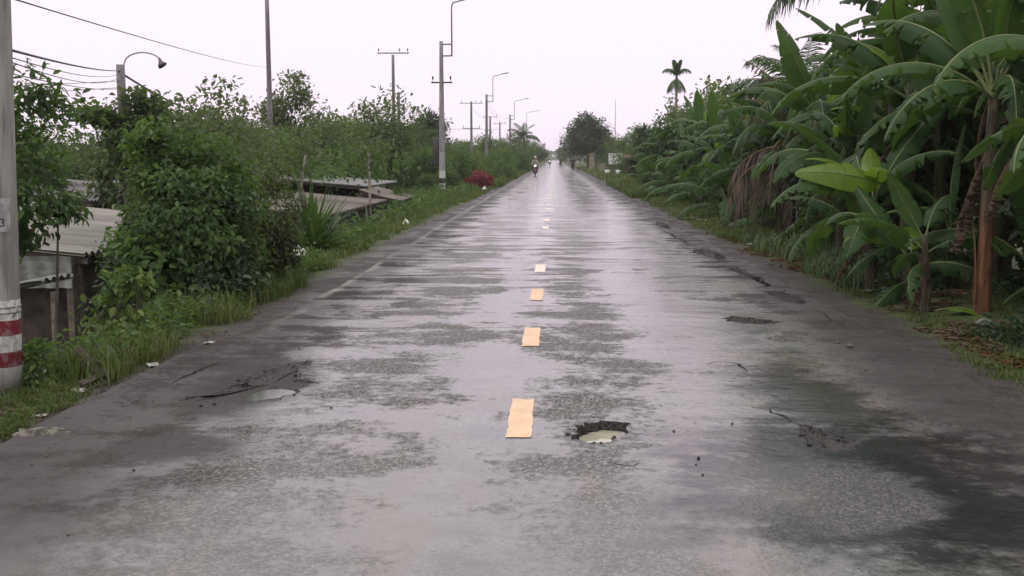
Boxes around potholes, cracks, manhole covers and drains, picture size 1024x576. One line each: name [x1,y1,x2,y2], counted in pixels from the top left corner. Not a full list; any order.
pothole [762,290,806,305]
crack [173,362,222,383]
pothole [185,358,319,407]
pothole [722,316,782,324]
pothole [565,420,631,444]
pothole [795,424,862,451]
